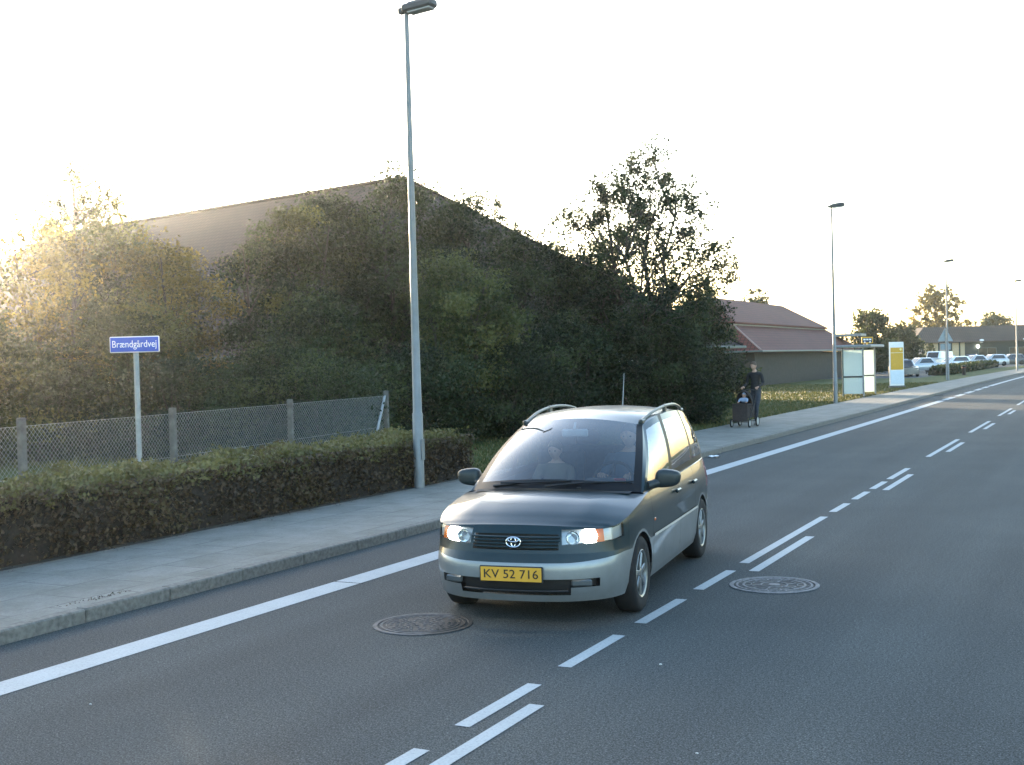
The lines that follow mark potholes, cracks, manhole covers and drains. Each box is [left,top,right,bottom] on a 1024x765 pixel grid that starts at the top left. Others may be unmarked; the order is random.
manhole cover [729,576,820,593]
manhole cover [373,613,473,635]
